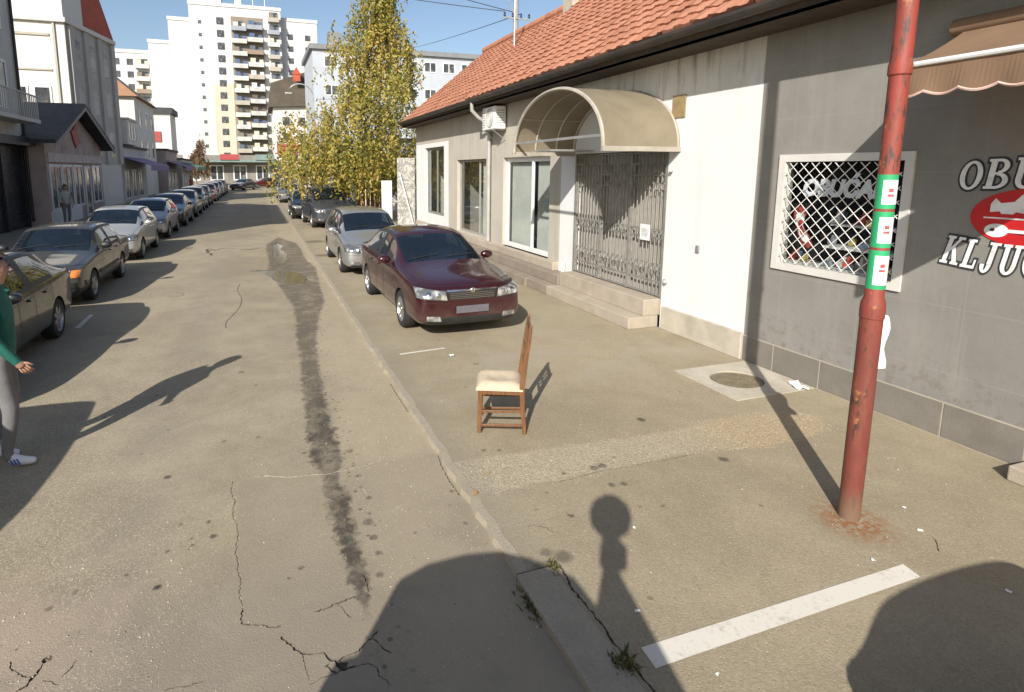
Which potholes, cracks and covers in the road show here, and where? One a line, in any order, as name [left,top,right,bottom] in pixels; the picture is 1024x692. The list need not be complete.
manhole cover [674,361,814,401]
crack [556,562,656,692]
crack [256,461,381,478]
crack [231,482,391,685]
crack [9,659,77,692]
